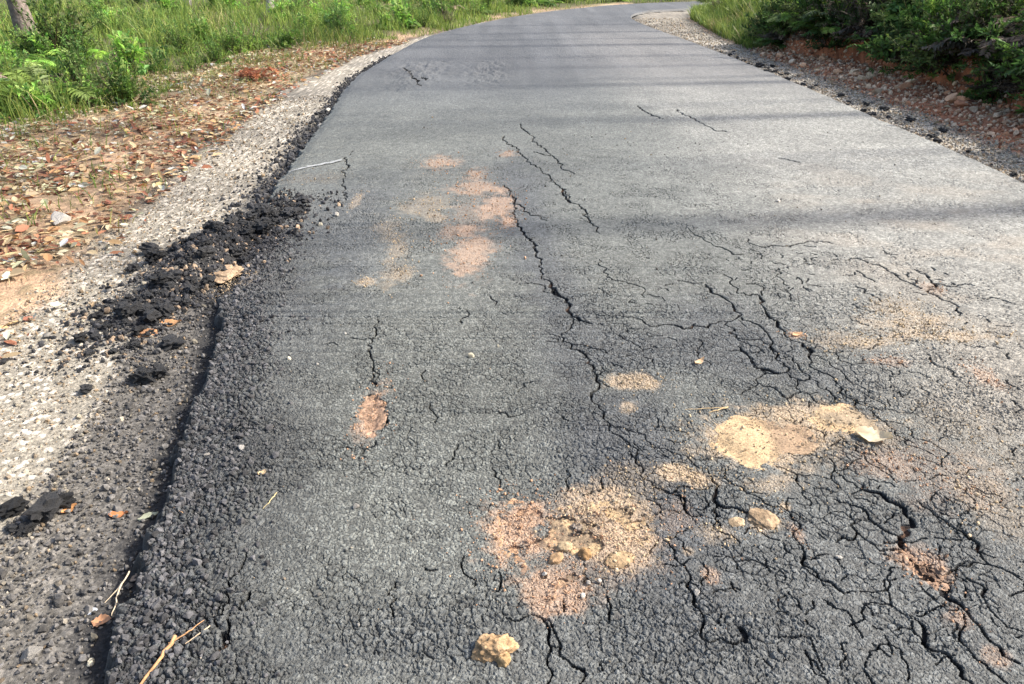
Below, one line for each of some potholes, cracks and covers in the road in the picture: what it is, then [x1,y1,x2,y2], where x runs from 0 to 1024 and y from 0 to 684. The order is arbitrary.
crack [368,327,378,387]
